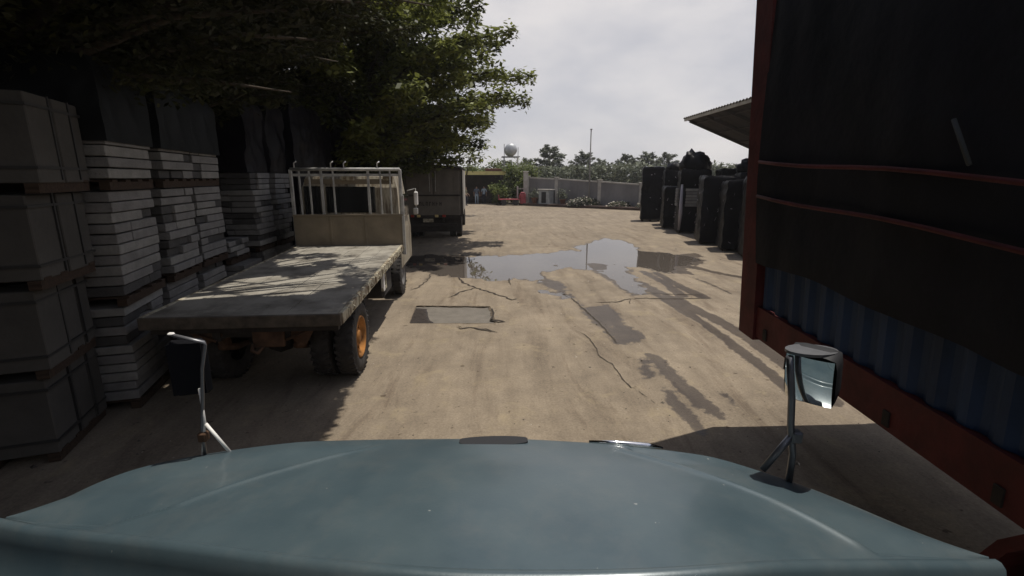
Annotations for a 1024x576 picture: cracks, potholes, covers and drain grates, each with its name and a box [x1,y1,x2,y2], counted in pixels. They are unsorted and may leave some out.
pothole [409,305,505,323]
crack [562,292,704,397]
crack [451,276,518,300]
